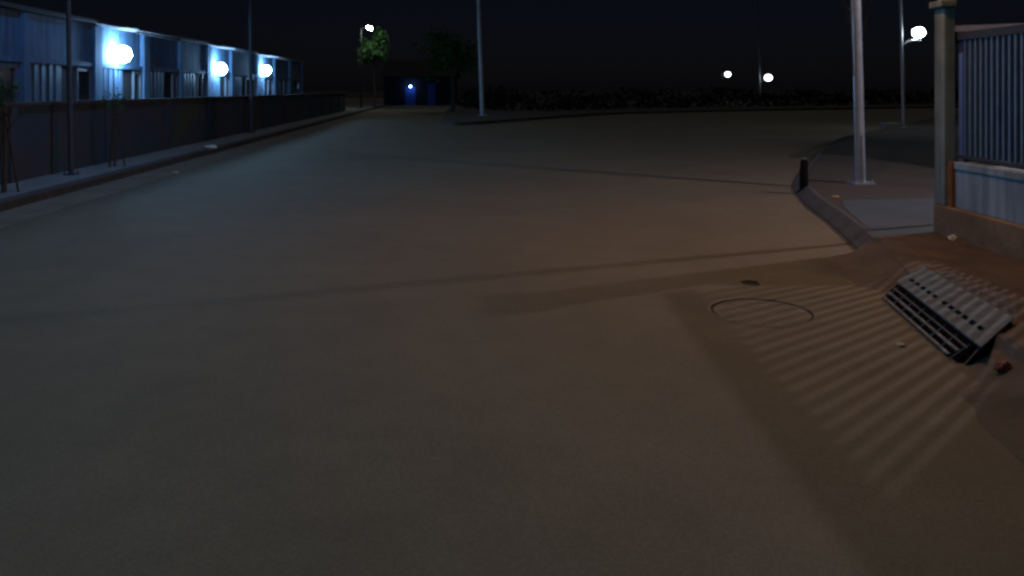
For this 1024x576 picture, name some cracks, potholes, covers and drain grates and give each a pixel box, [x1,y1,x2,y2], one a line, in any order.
manhole cover [707,298,818,328]
drain grate [882,266,1014,365]
